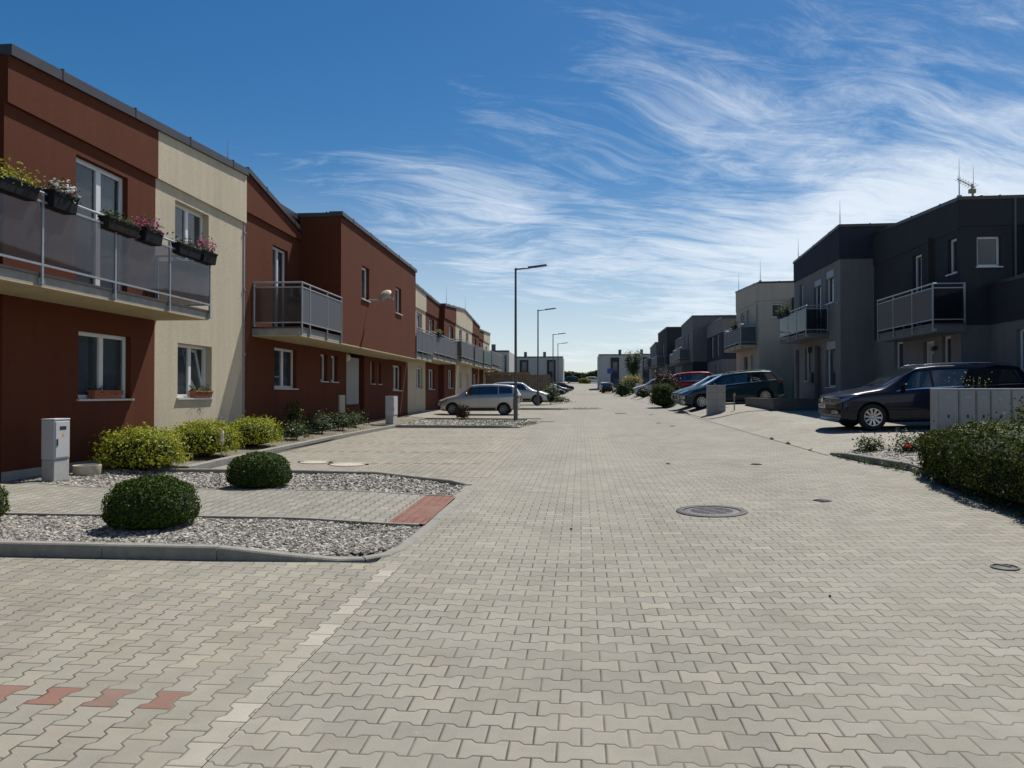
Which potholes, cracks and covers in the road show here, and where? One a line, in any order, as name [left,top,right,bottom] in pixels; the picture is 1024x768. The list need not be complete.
manhole cover [676,505,748,518]
